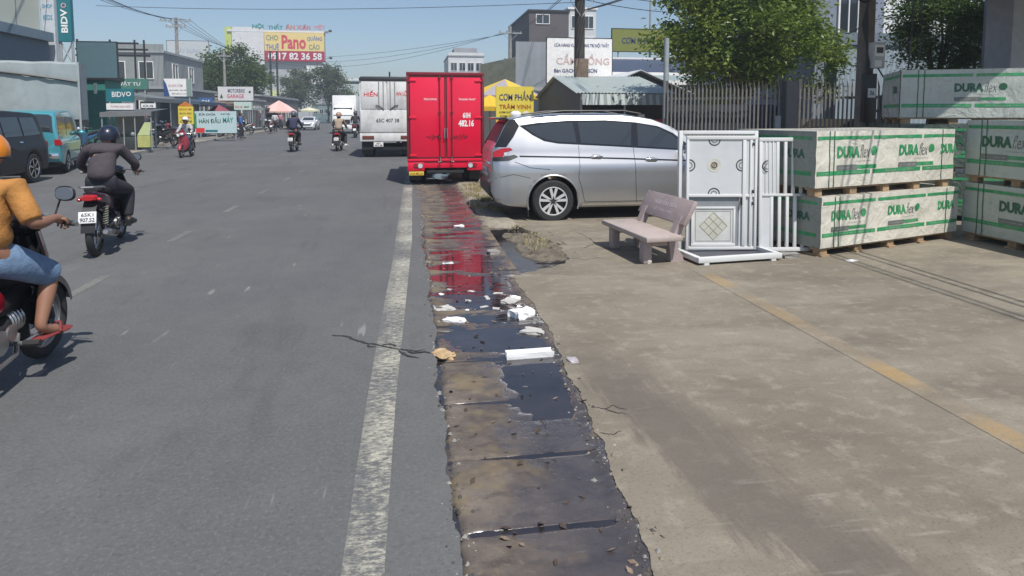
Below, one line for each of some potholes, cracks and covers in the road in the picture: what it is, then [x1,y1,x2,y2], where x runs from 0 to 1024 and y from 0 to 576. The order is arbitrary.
pothole [502,231,579,262]
crack [334,335,431,358]
